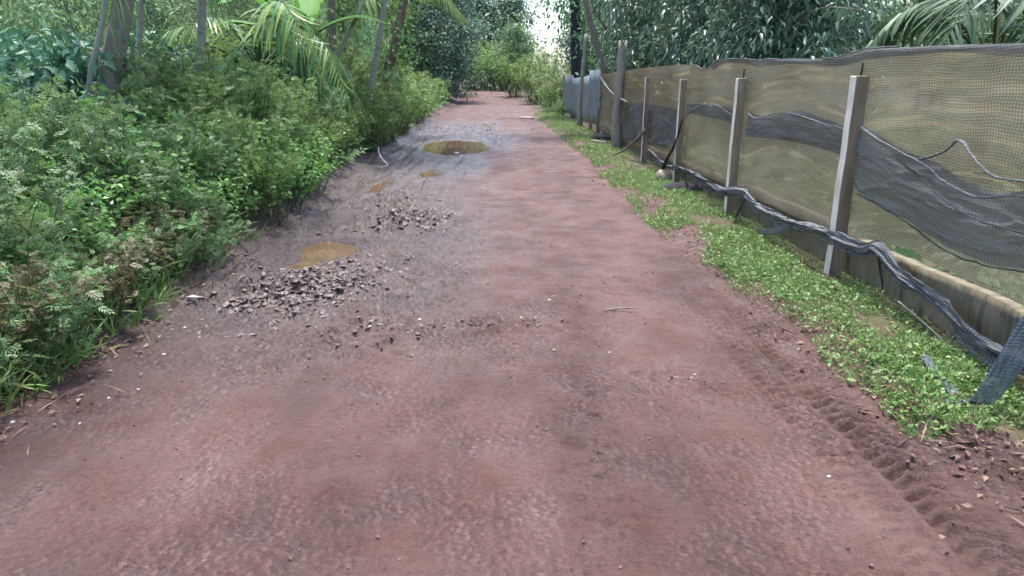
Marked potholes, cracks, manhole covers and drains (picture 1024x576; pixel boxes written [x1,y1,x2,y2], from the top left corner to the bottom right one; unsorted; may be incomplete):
pothole [283,240,362,269]
pothole [417,169,442,178]
pothole [423,139,491,156]
pothole [362,178,388,194]
